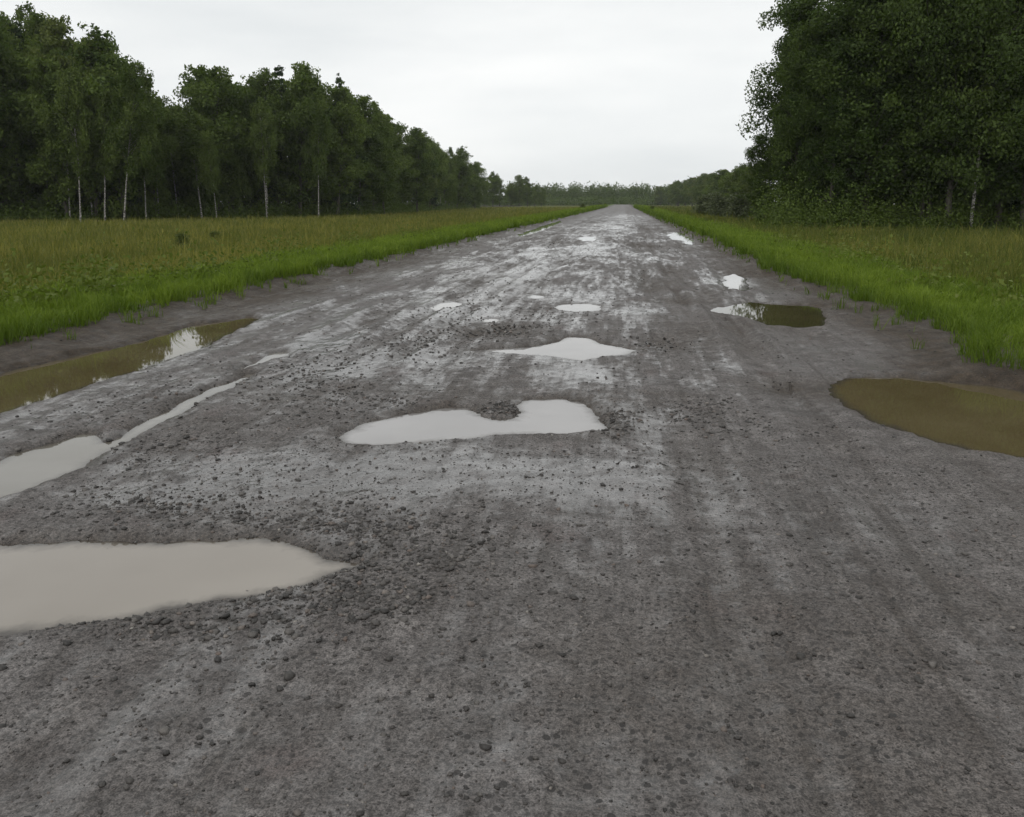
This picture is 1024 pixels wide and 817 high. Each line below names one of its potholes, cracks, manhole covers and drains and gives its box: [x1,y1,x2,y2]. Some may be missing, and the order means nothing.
pothole [798,365,1024,464]
pothole [710,270,763,291]
pothole [661,231,708,245]
pothole [542,300,612,312]
pothole [694,295,847,328]
pothole [320,388,633,449]
pothole [0,518,393,646]
pothole [444,331,657,363]
pothole [423,298,471,311]
